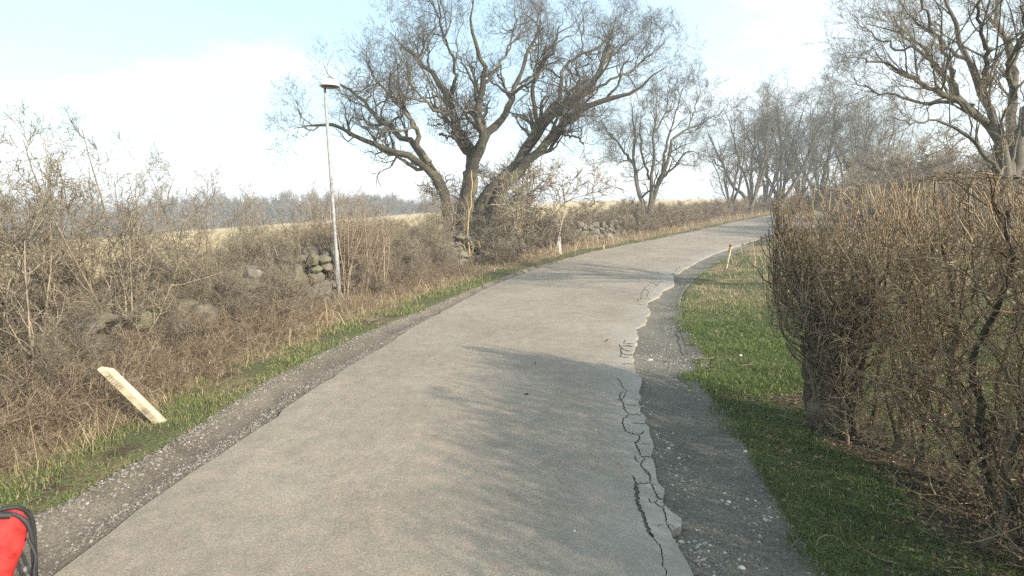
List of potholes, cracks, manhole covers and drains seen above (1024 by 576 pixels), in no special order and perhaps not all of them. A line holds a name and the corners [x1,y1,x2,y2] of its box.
crack [617,340,677,575]
